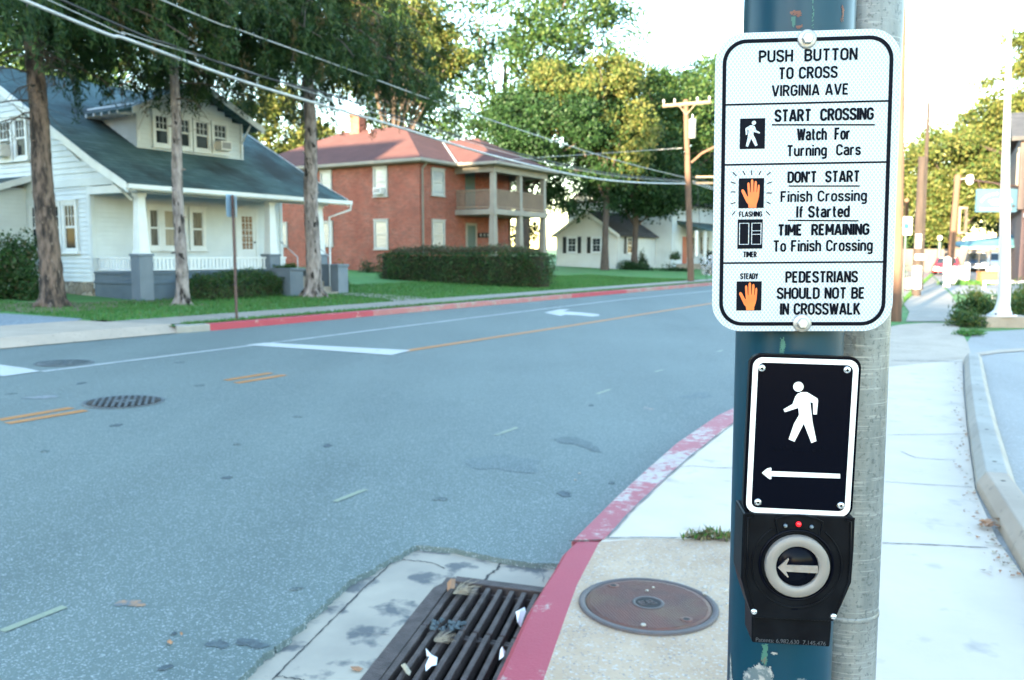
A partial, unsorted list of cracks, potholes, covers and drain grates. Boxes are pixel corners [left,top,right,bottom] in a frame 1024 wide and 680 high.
manhole cover [579,578,719,636]
drain grate [360,576,544,680]
